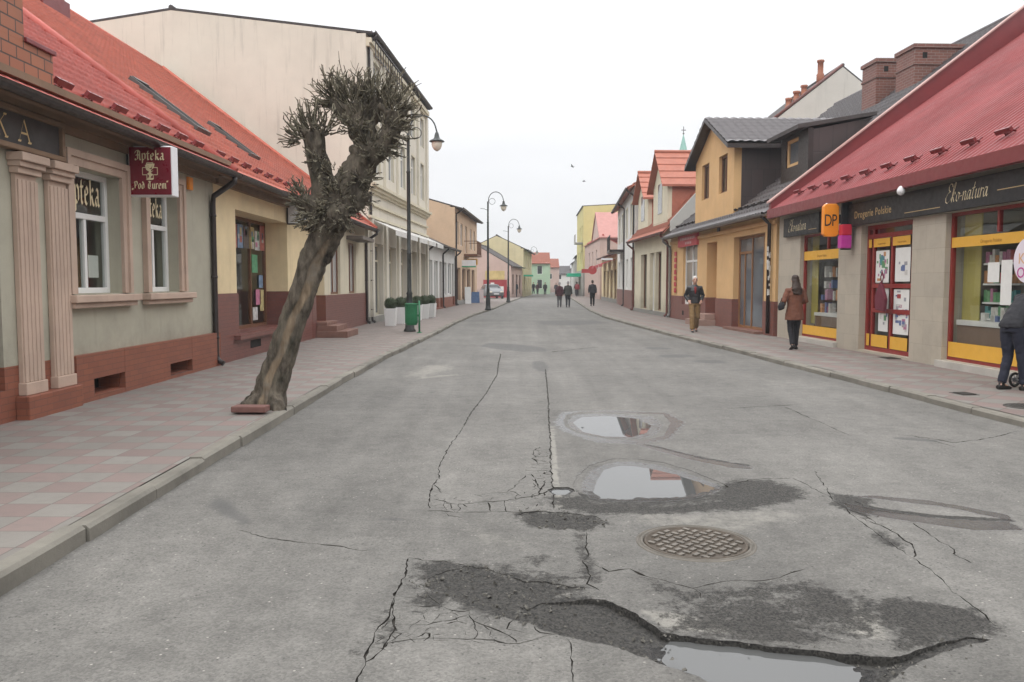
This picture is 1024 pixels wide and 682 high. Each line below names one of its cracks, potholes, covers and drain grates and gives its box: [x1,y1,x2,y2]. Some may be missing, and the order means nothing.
crack [355,558,554,682]
pothole [564,412,671,441]
crack [738,476,993,624]
crack [240,530,366,551]
crack [428,354,552,518]
pothole [574,459,728,504]
pothole [520,596,989,682]
manhole cover [636,525,757,562]
pothole [412,565,586,620]
